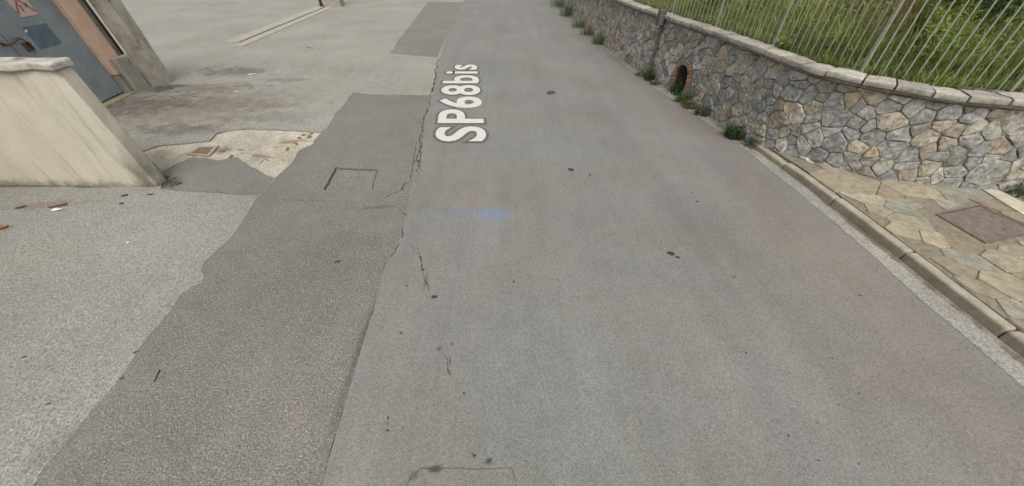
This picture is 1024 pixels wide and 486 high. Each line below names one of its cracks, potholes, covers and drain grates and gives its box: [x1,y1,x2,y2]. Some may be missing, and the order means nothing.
manhole cover [935,205,1024,244]
crack [356,59,439,233]
manhole cover [325,168,378,190]
